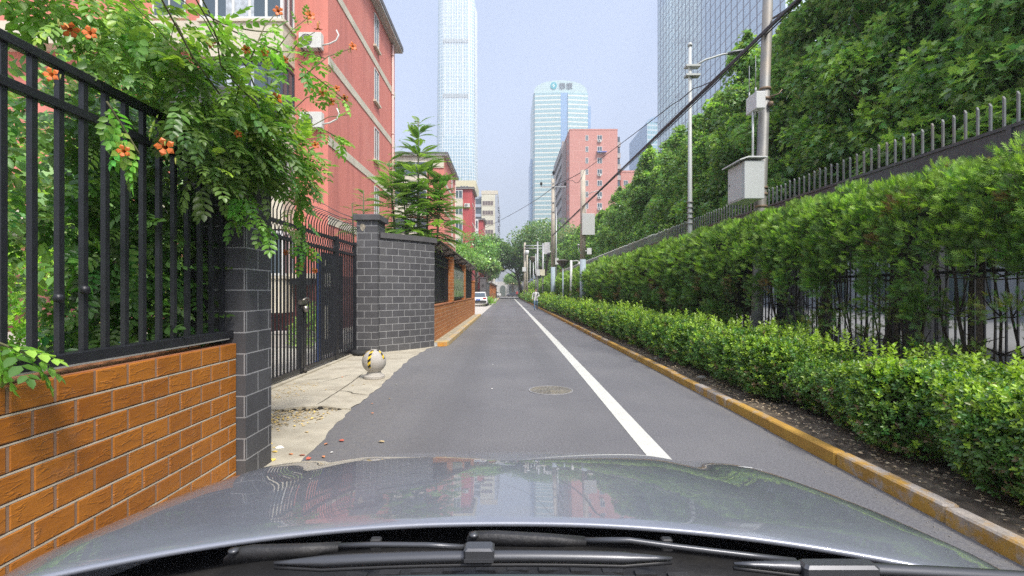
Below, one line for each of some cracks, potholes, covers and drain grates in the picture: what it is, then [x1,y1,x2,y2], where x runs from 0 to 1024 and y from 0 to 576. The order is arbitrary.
manhole cover [529,386,573,395]
crack [282,374,366,412]
